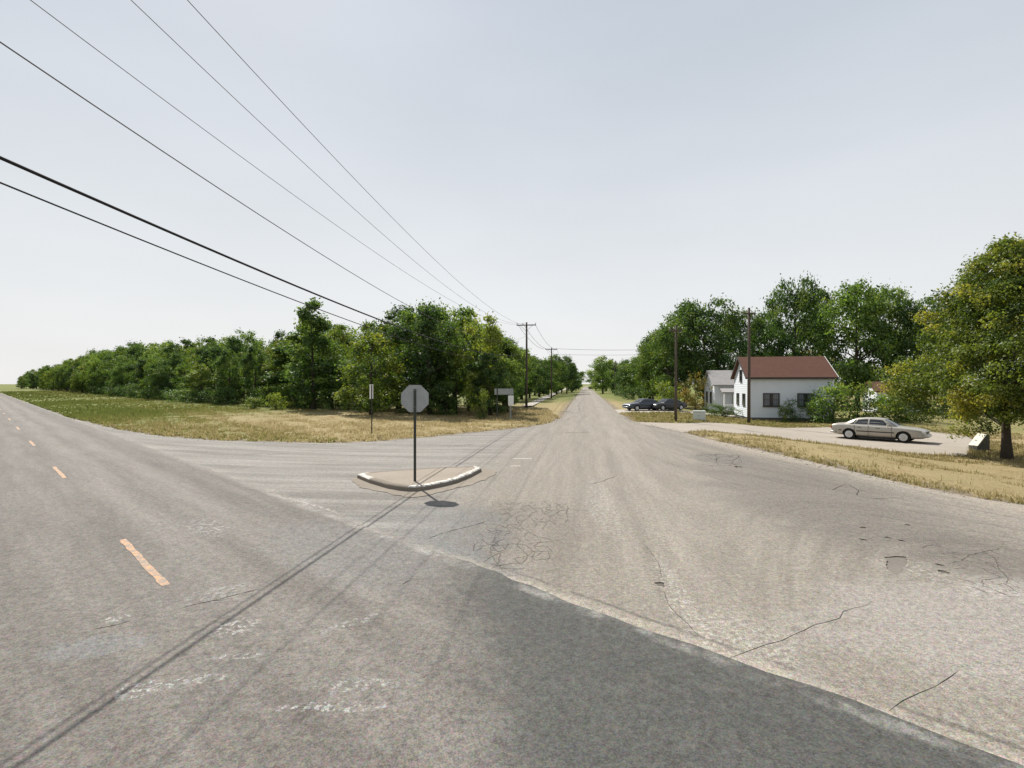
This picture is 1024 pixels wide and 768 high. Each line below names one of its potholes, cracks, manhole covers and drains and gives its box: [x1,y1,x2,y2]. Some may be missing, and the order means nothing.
crack [925,545,1017,595]
pothole [885,556,907,575]
crack [431,500,572,570]
